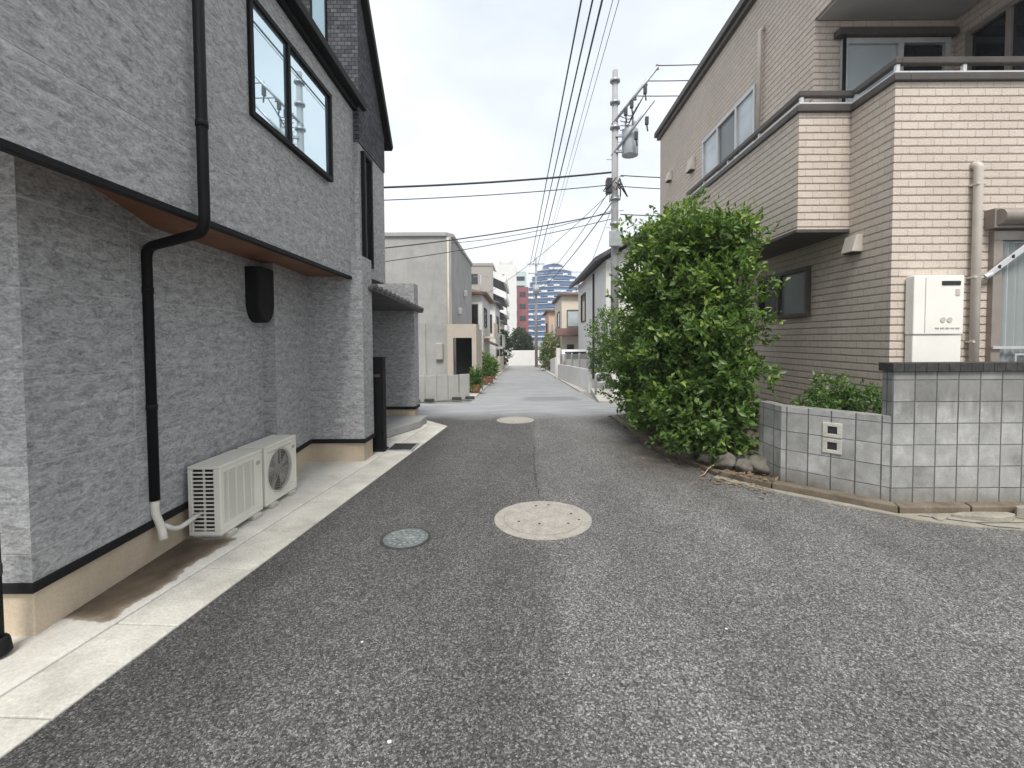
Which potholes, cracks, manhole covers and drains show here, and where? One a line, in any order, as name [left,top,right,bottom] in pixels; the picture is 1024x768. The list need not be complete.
manhole cover [380,527,431,550]
drain grate [385,443,419,452]
manhole cover [494,501,592,540]
